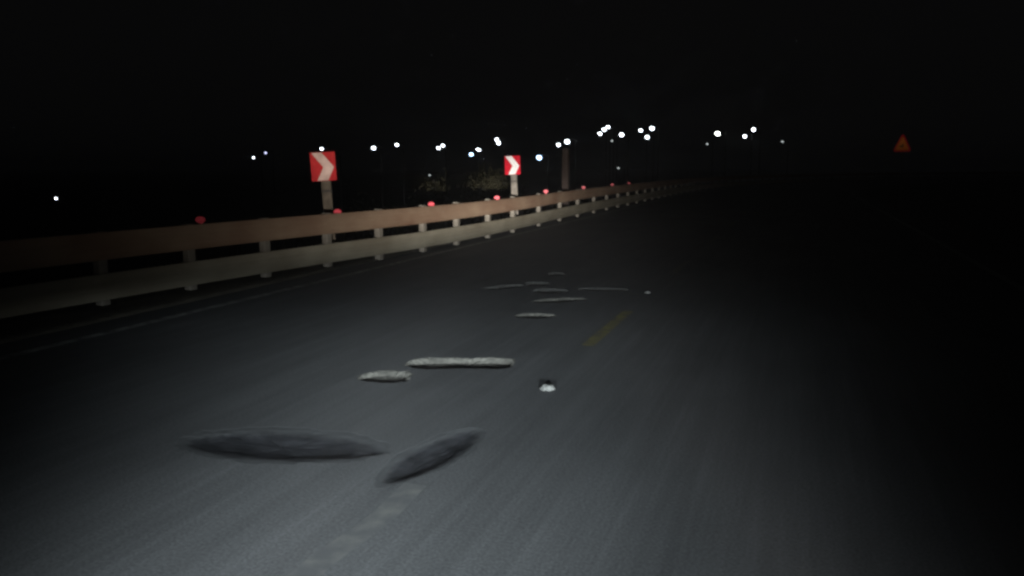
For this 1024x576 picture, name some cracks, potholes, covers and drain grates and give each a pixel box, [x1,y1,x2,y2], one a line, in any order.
pothole [172,426,392,465]
pothole [374,427,487,488]
